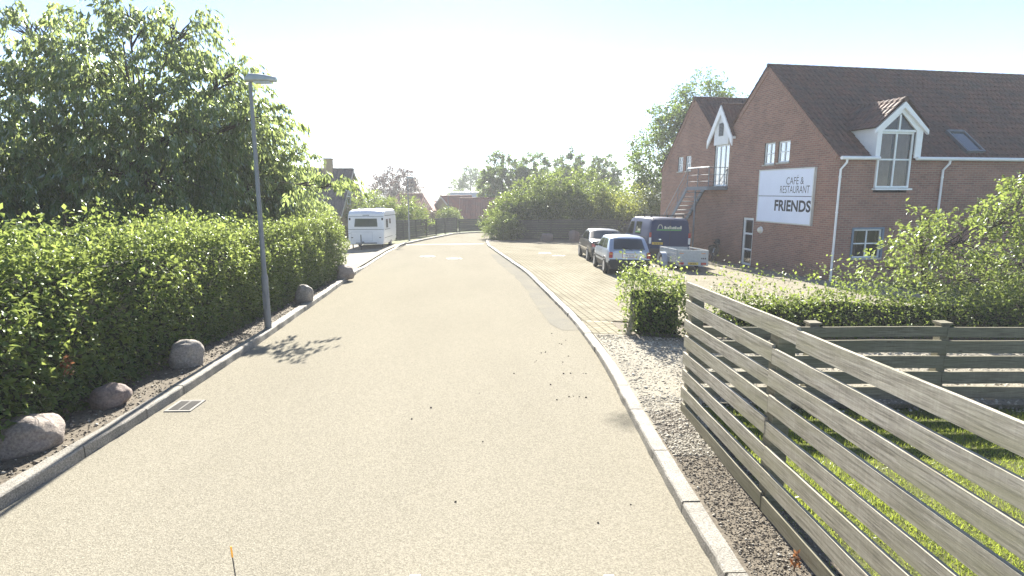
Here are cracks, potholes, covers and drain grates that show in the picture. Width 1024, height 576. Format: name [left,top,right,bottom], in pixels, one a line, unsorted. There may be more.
drain grate [164,400,206,412]
